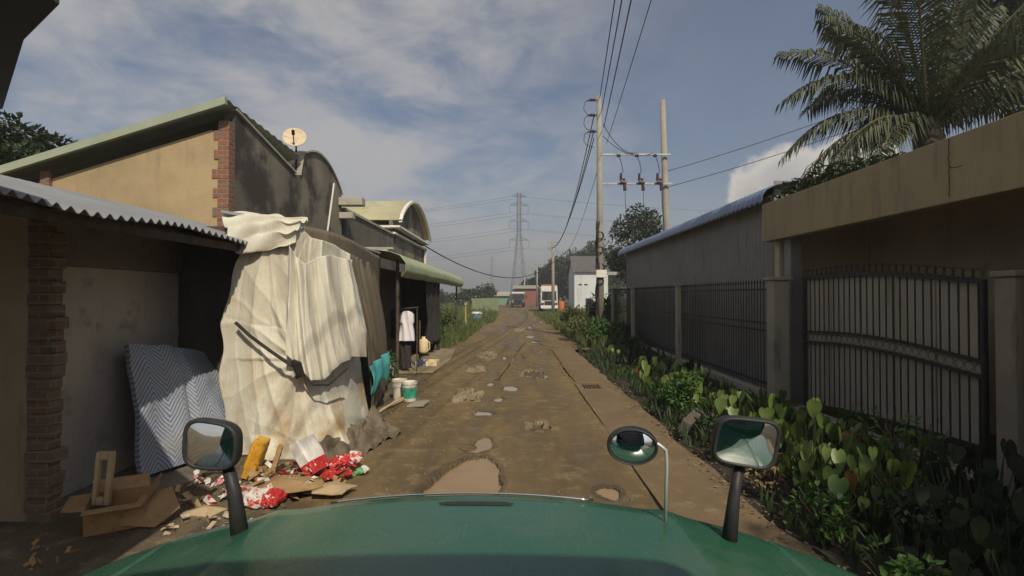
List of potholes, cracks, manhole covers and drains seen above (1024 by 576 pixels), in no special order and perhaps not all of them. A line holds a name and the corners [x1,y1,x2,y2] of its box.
pothole [412,453,511,497]
pothole [463,364,490,374]
pothole [468,409,499,417]
crack [493,341,582,384]
pothole [474,351,500,360]
pothole [516,369,551,381]
pothole [448,387,488,405]
pothole [521,420,557,434]
pothole [589,483,627,504]
pothole [457,435,499,455]
